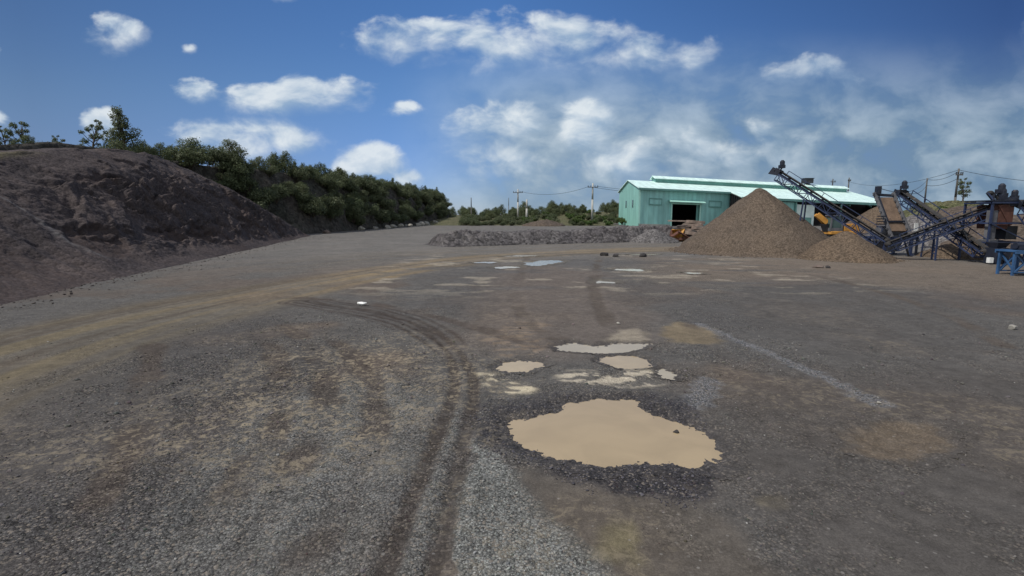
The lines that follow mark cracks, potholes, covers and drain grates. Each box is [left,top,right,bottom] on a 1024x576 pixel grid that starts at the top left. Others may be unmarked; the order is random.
pothole [485,355,557,375]
pothole [461,388,751,511]
pothole [514,259,573,267]
pothole [544,338,660,356]
pothole [590,350,662,372]
pothole [649,364,686,382]
